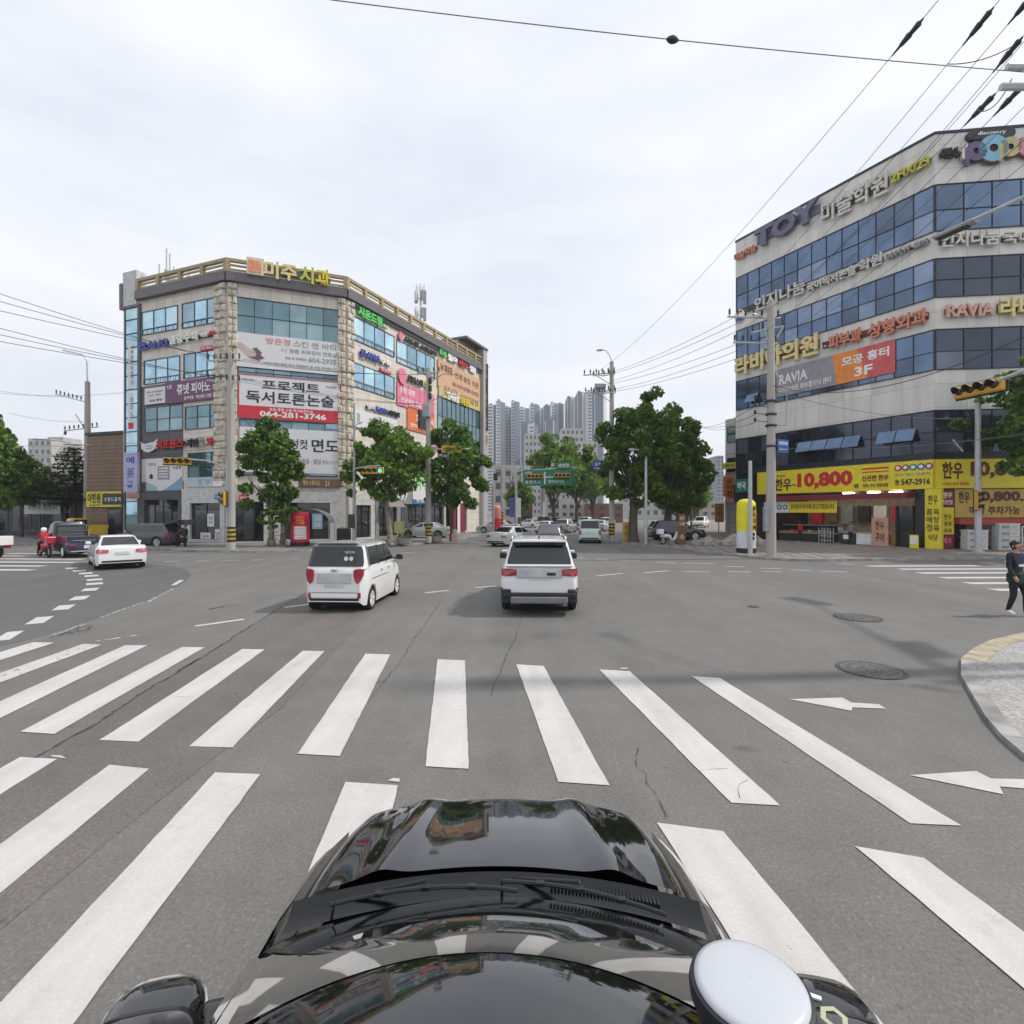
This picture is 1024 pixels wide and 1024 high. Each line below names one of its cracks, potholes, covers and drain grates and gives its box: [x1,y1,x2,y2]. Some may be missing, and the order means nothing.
manhole cover [833,613,884,622]
manhole cover [835,661,909,680]
